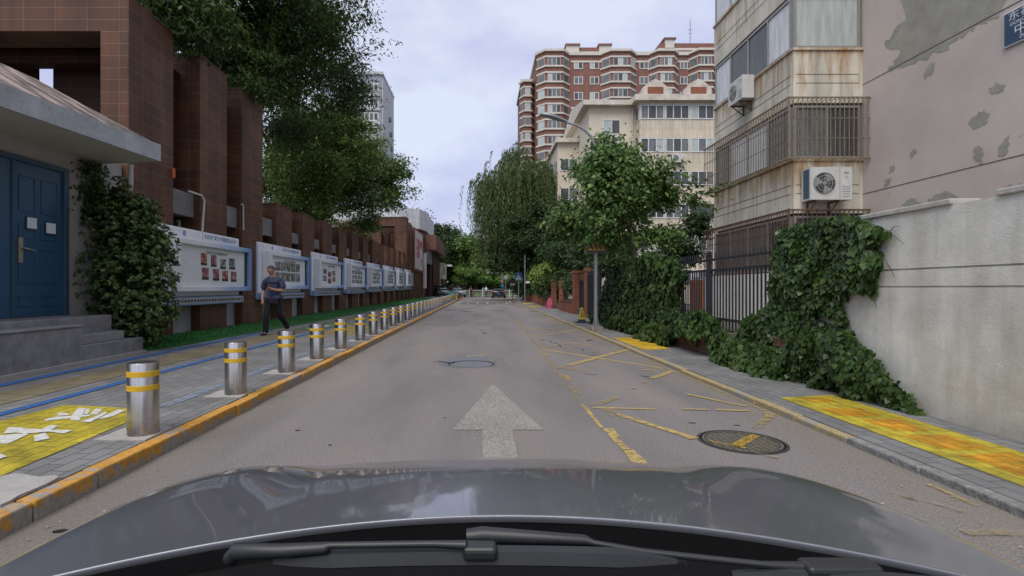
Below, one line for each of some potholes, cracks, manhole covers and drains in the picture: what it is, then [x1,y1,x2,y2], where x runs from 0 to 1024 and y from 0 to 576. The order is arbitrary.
manhole cover [697,430,790,455]
